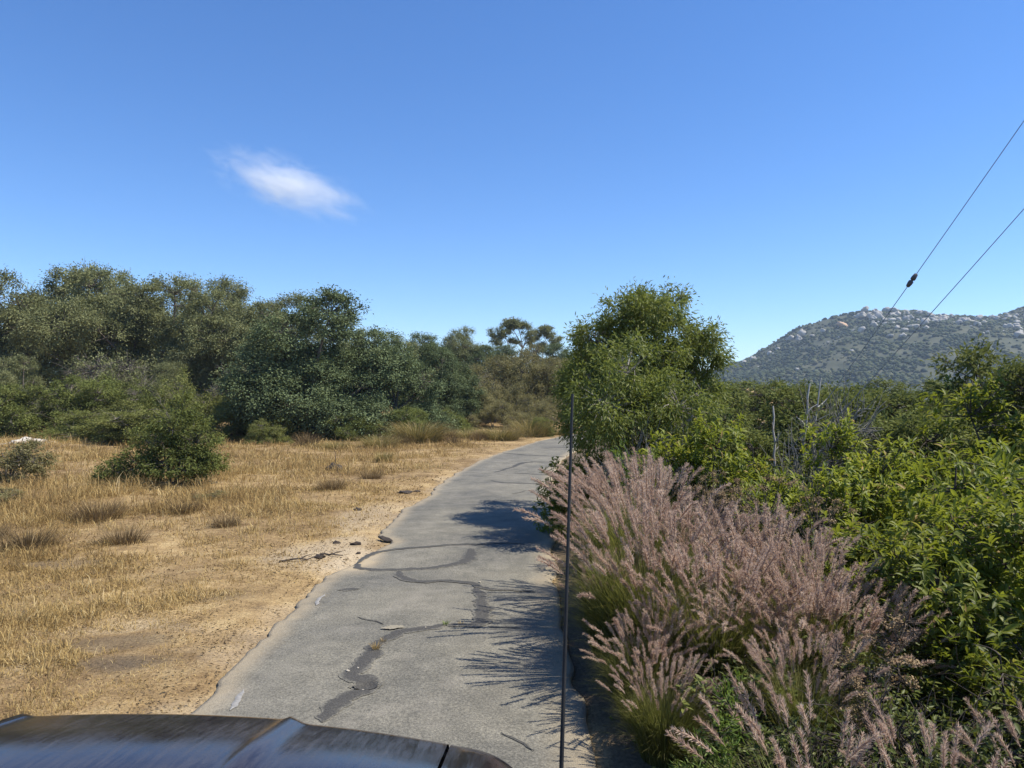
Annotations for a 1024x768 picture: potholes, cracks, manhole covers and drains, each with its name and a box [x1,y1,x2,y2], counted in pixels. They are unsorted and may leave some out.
crack [491,447,566,494]
crack [315,542,536,722]
crack [501,732,534,751]
